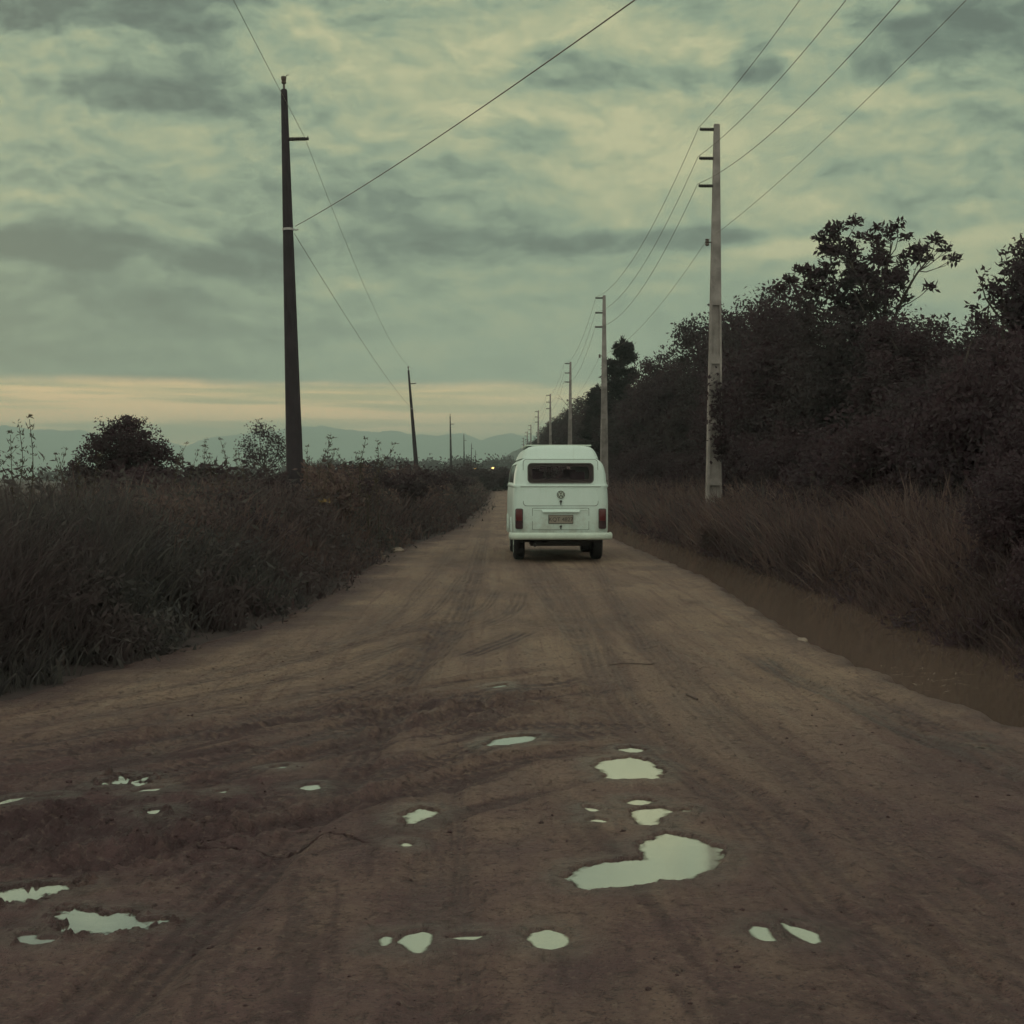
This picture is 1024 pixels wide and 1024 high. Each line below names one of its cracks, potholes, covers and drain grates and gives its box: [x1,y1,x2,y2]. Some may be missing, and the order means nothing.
pothole [497,916,609,963]
pothole [380,919,463,969]
pothole [458,730,563,752]
pothole [370,801,471,833]
pothole [610,800,723,831]
pothole [529,827,760,900]
crack [153,829,385,867]
pothole [750,909,862,957]
pothole [710,913,794,954]
pothole [564,753,692,785]
pothole [19,895,207,946]
